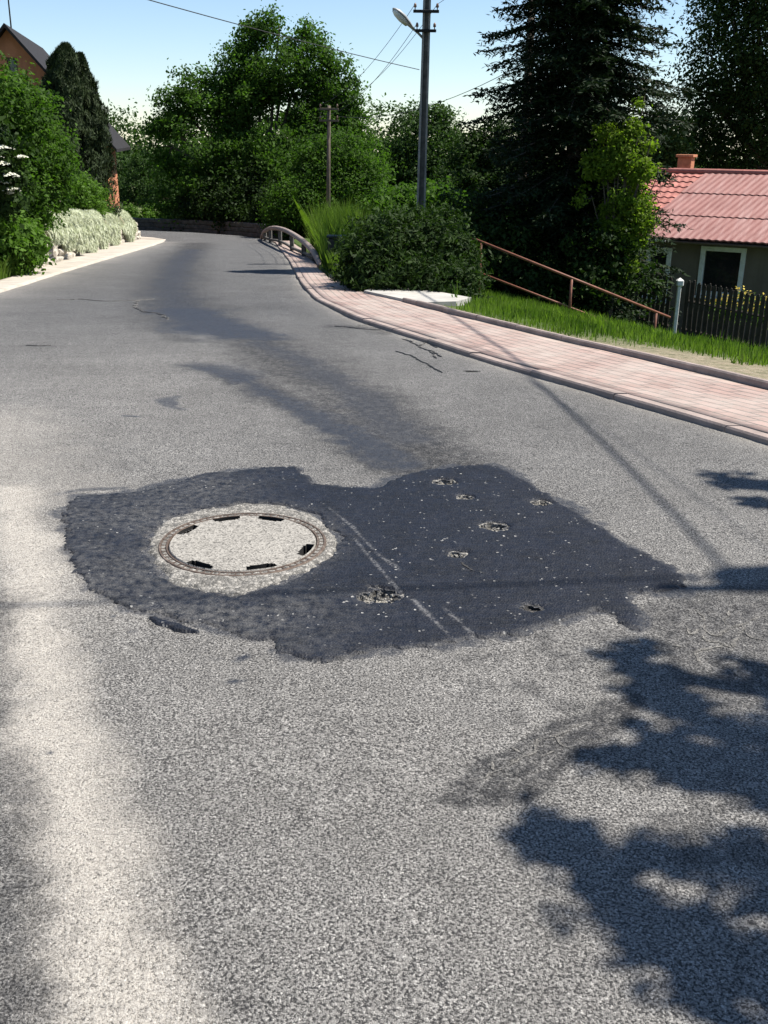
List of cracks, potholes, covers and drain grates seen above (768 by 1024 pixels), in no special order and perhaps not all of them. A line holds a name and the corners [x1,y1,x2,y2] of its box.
crack [57,299,169,320]
manhole cover [147,503,338,597]
pothole [478,522,510,531]
crack [395,339,443,373]
pothole [357,587,404,603]
pothole [519,604,544,613]
